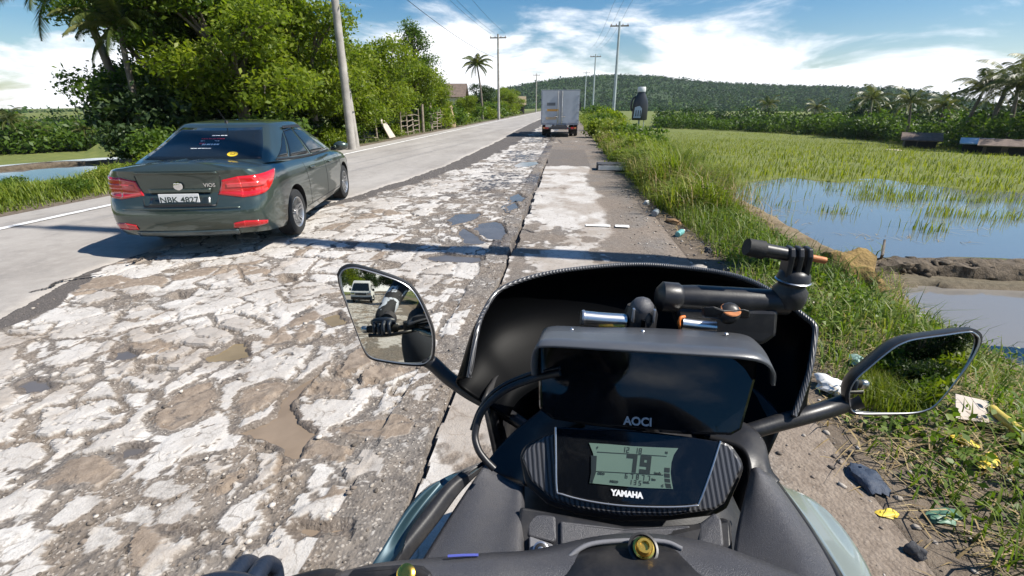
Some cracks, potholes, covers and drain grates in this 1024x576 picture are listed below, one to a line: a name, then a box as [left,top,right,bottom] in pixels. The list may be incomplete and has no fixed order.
pothole [5,374,64,396]
pothole [506,192,528,203]
pothole [442,211,484,228]
pothole [104,343,147,364]
pothole [318,309,352,329]
pothole [469,220,509,240]
crack [0,126,585,576]
pothole [196,338,256,364]
pothole [226,360,333,464]
pothole [455,227,495,245]
